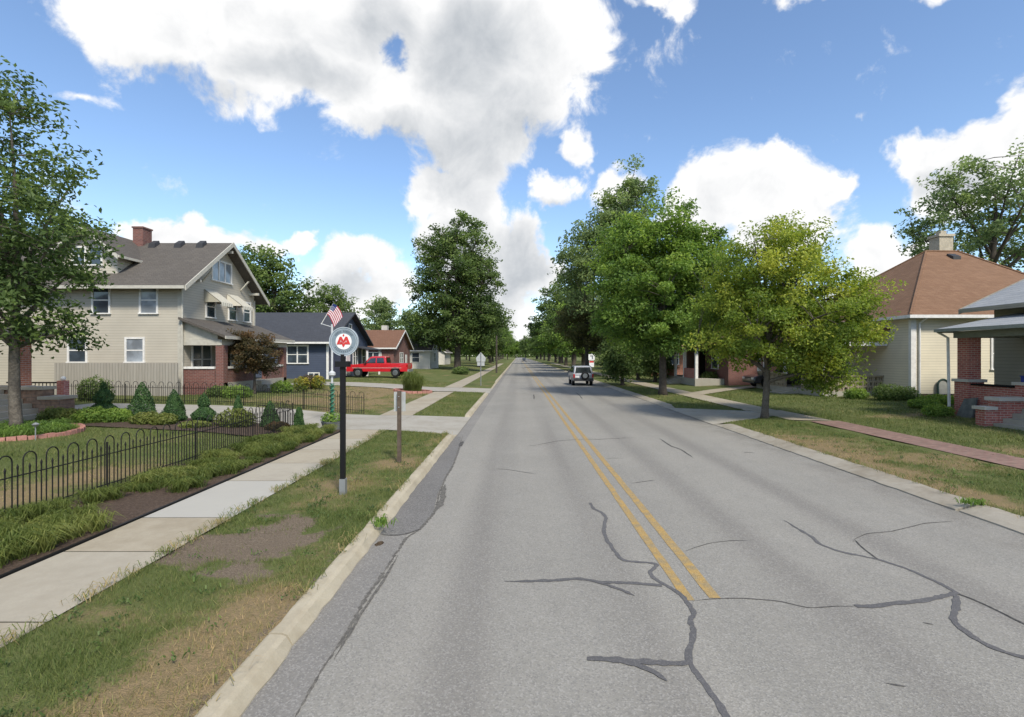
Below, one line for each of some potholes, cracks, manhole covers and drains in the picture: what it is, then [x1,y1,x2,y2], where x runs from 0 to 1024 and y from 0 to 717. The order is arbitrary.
crack [854,521,949,540]
crack [696,598,835,608]
